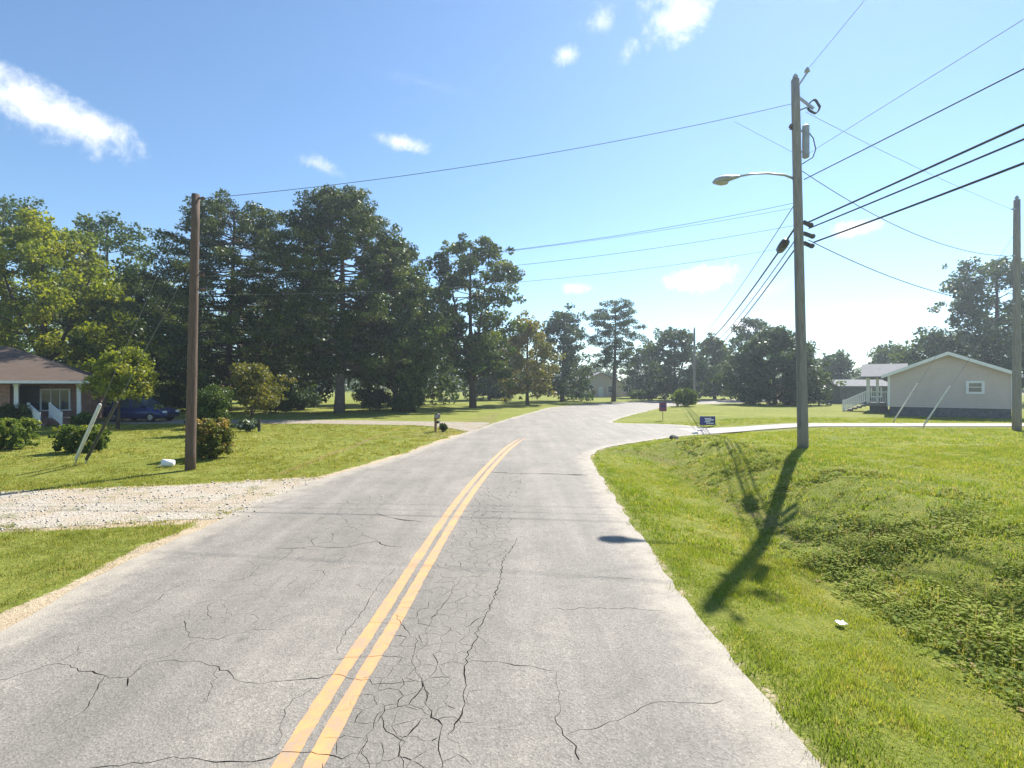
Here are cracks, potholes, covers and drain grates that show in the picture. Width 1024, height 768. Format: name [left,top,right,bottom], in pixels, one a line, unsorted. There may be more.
crack [0,472,722,768]
